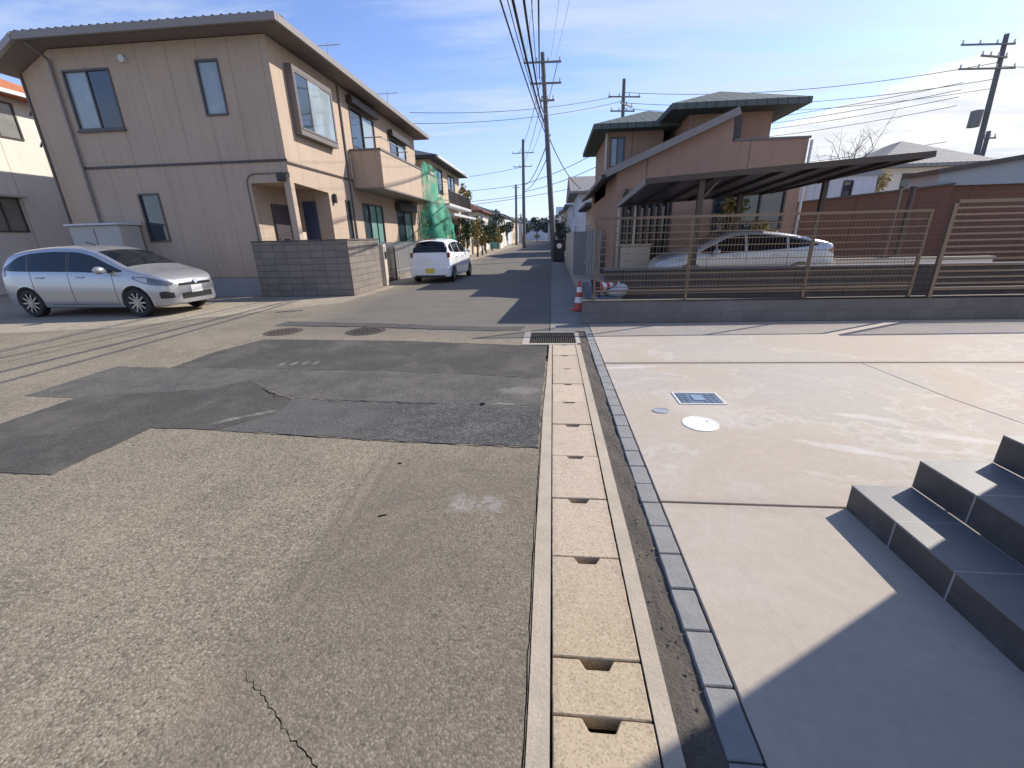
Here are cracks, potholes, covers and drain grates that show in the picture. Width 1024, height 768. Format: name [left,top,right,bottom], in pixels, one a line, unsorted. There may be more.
drain grate [522,331,581,355]
crack [221,355,548,768]
manhole cover [346,327,386,336]
manhole cover [263,328,303,336]
utility cover [682,416,719,432]
